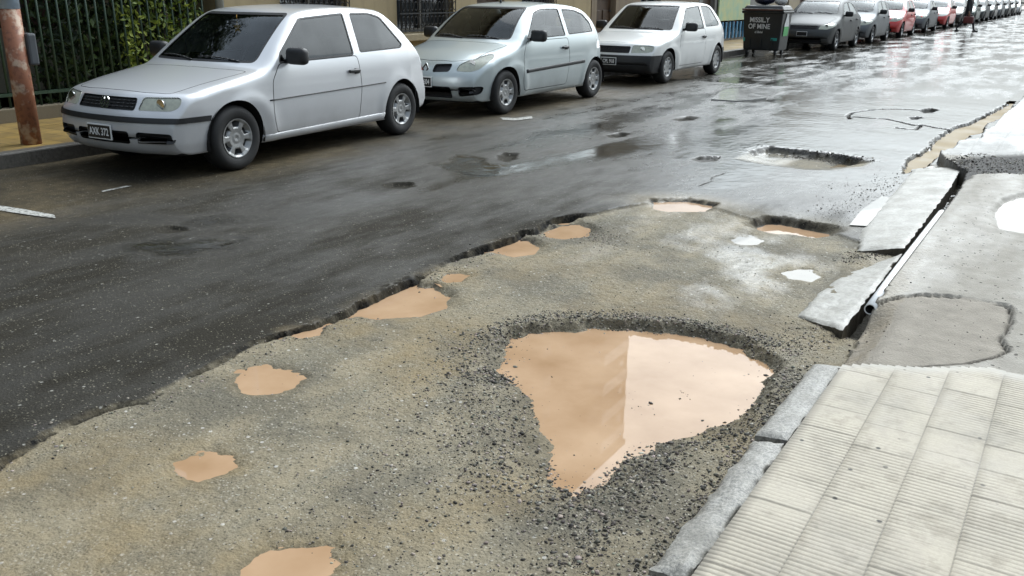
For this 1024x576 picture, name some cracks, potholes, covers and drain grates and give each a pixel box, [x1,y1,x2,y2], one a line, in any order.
pothole [729,145,879,171]
pothole [740,214,848,238]
pothole [429,154,518,177]
pothole [483,237,560,259]
pothole [532,220,609,240]
crack [845,108,951,133]
pothole [647,196,722,212]
pothole [220,529,366,576]
pothole [226,359,317,399]
pothole [463,317,787,515]
pothole [162,441,262,486]
pothole [279,321,331,340]
